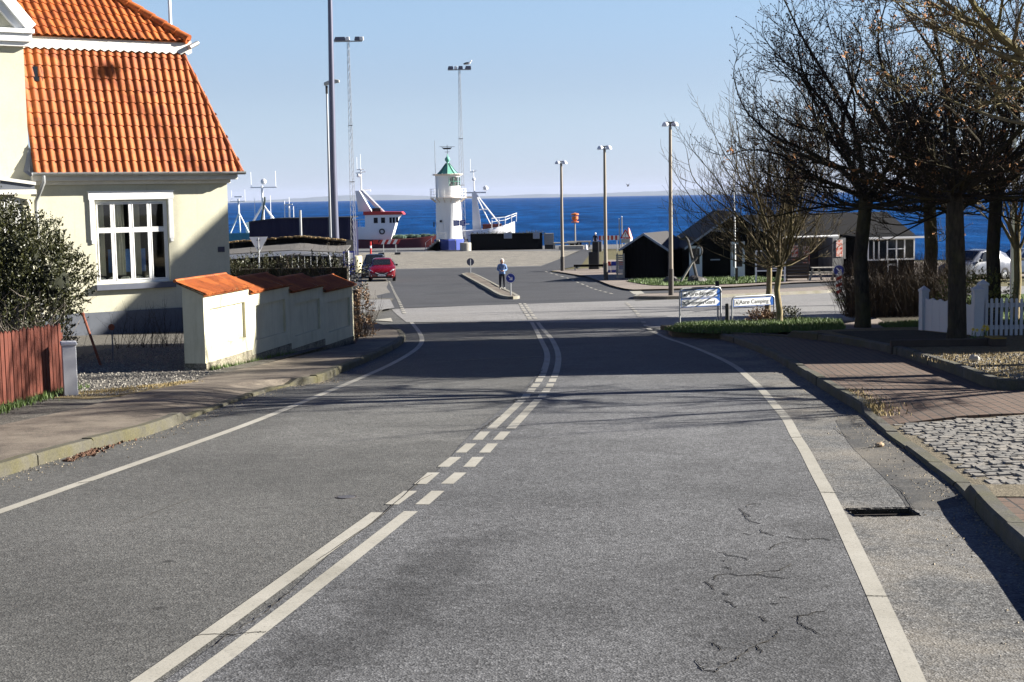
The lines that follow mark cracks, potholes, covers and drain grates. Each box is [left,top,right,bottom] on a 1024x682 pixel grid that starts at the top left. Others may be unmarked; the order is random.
drain grate [845,507,920,517]
crack [194,587,304,647]
crack [696,504,825,674]
